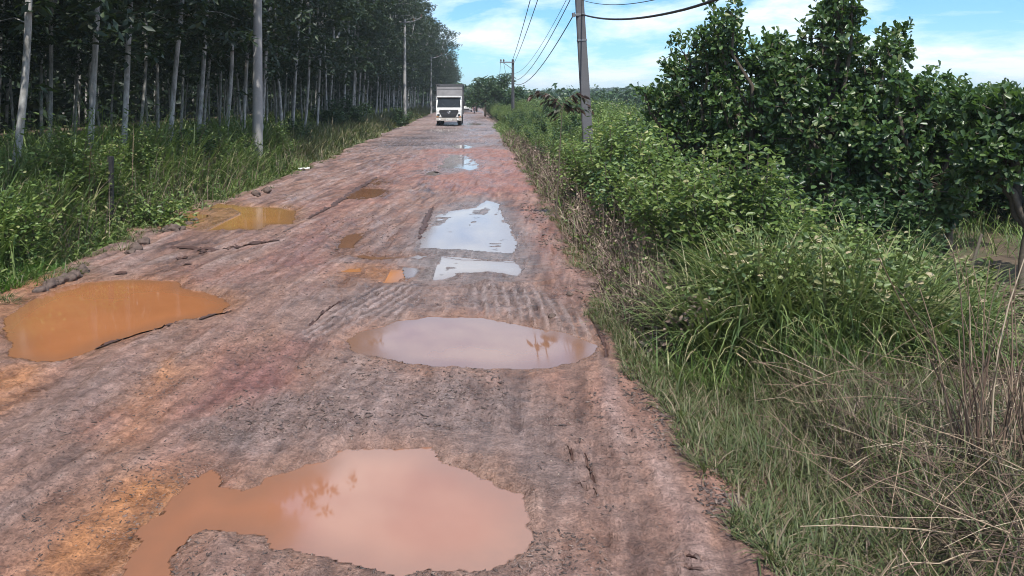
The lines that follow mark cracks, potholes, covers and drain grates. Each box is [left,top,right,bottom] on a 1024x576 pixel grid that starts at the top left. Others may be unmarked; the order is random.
pothole [346,185,389,200]
crack [169,239,276,265]
pothole [418,201,519,262]
pothole [402,254,527,282]
pothole [435,154,479,173]
pothole [204,204,296,230]
pothole [365,267,405,283]
pothole [123,447,533,576]
pothole [2,280,230,362]
pothole [341,268,361,276]
pothole [338,231,364,255]
pothole [346,317,598,369]
